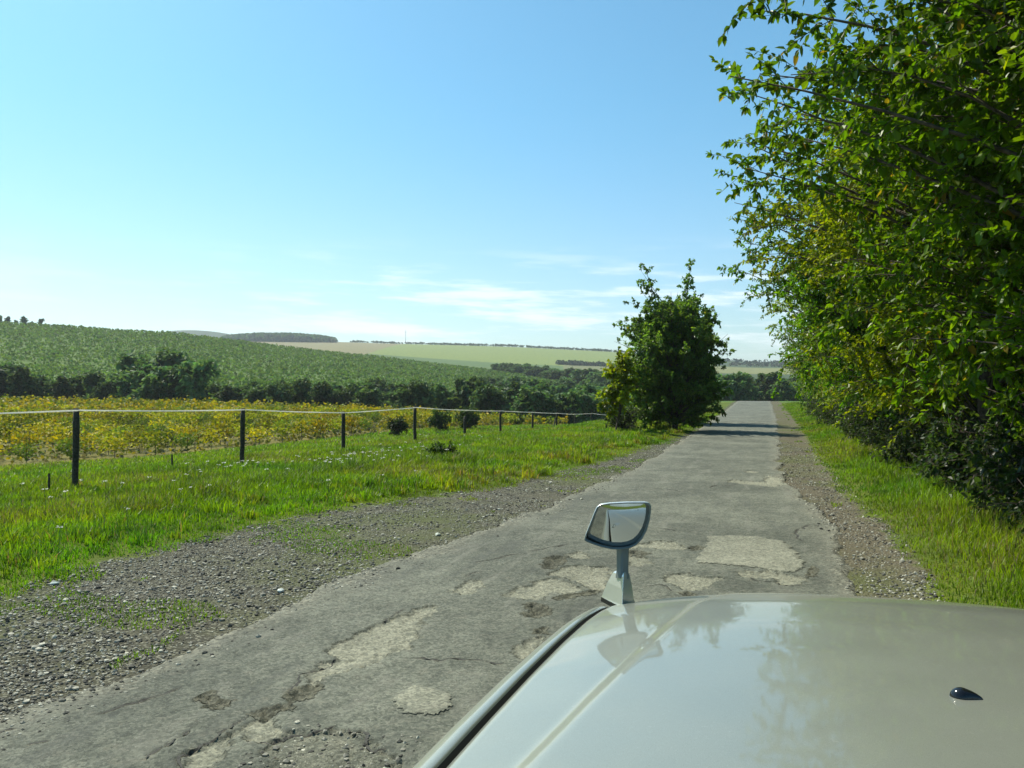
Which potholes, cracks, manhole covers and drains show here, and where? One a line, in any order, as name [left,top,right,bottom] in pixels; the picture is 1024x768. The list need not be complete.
pothole [192,689,237,710]
pothole [447,579,486,595]
pothole [246,702,297,723]
pothole [551,589,602,601]
pothole [305,605,439,687]
pothole [500,578,582,601]
crack [94,687,181,715]
pothole [547,565,613,591]
pothole [724,476,787,487]
pothole [281,684,325,703]
pothole [520,602,553,618]
